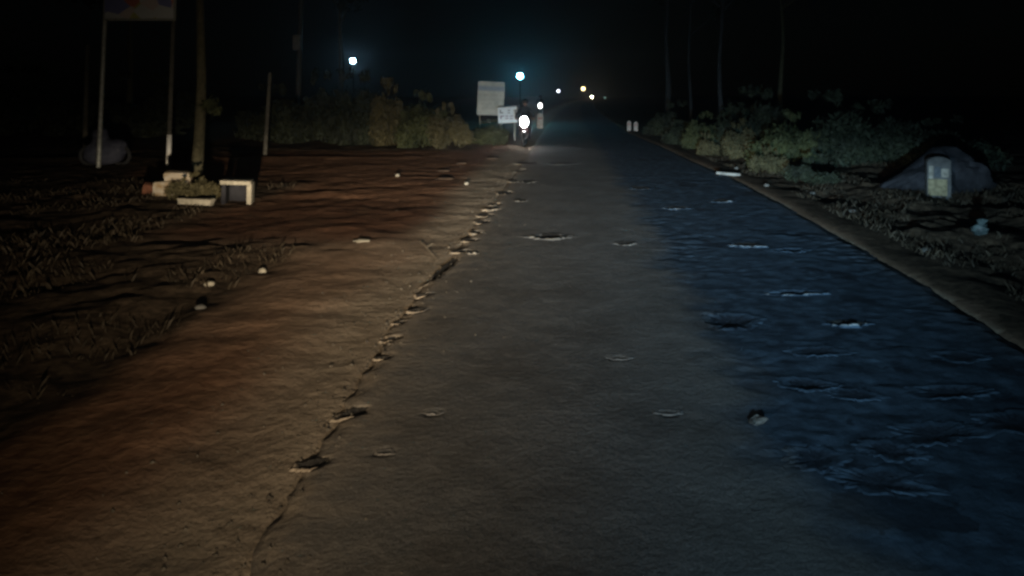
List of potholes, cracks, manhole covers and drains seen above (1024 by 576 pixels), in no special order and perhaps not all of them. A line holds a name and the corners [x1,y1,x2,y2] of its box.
pothole [518,233,579,241]
crack [288,457,330,473]
crack [372,162,582,361]
pothole [822,320,876,329]
pothole [699,311,768,331]
crack [329,407,368,423]
pothole [772,375,846,393]
